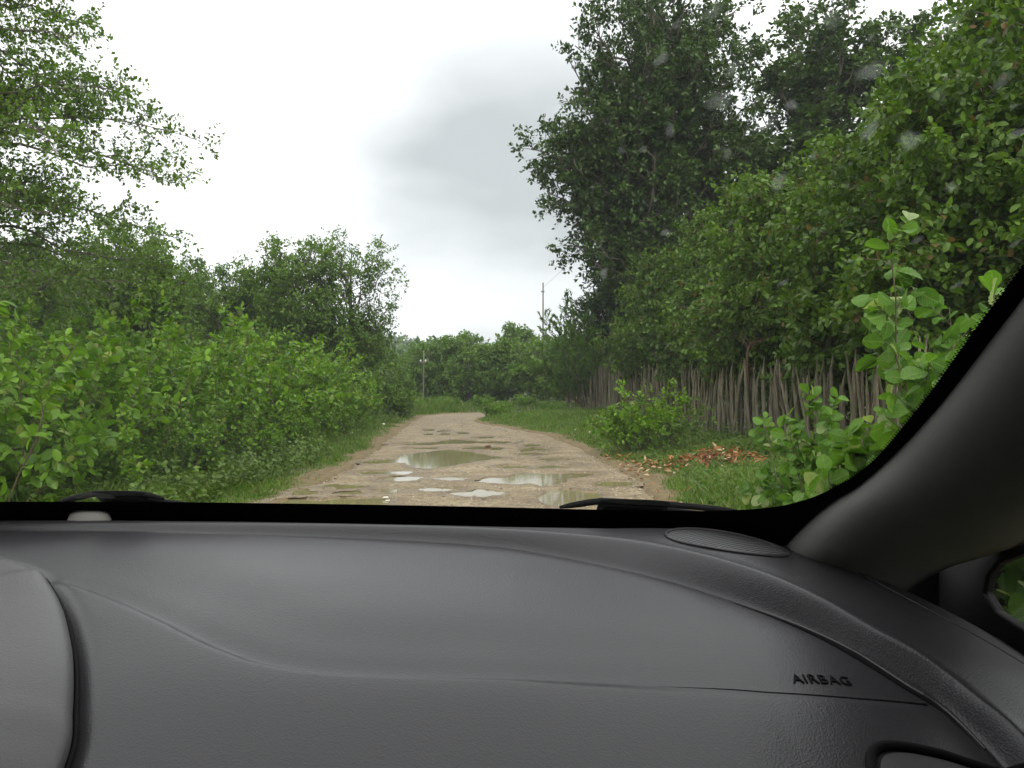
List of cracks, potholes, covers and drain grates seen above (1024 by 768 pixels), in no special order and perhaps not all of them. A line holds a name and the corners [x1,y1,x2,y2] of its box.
pothole [368,474,431,483]
pothole [350,449,511,470]
pothole [527,487,615,508]
pothole [438,487,518,499]
pothole [465,471,612,488]
